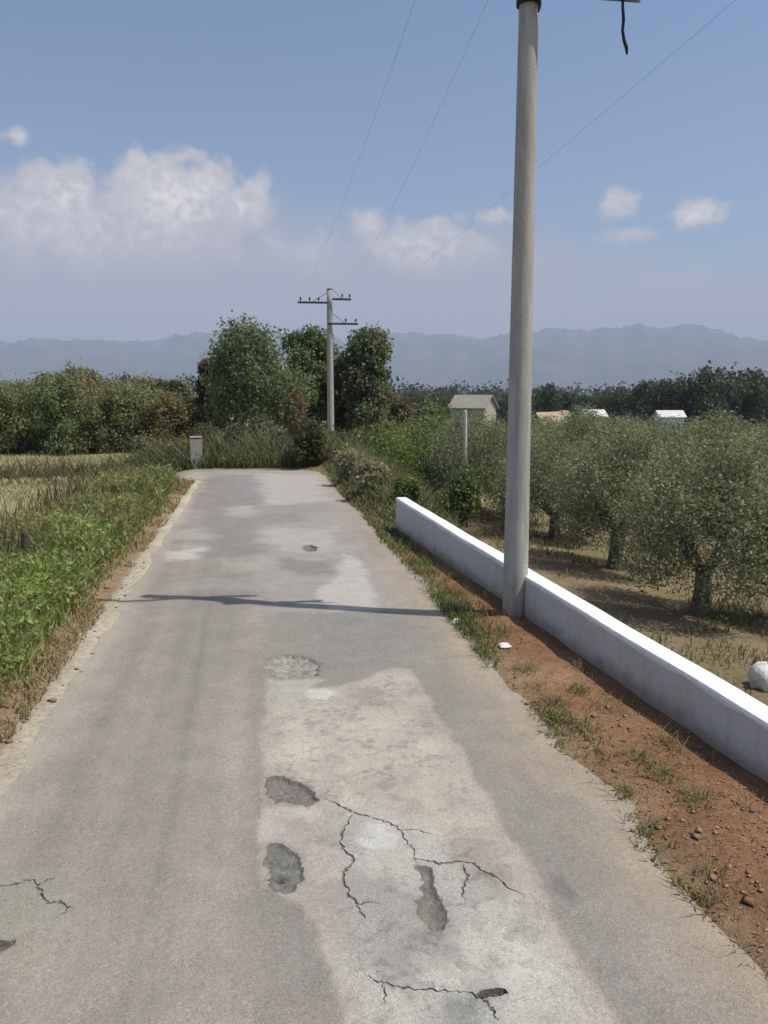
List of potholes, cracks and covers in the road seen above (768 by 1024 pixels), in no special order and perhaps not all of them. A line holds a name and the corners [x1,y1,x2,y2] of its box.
crack [329,800,524,918]
crack [365,974,499,1020]
pothole [264,775,320,807]
pothole [0,940,16,953]
pothole [262,843,305,894]
pothole [414,865,449,933]
crack [0,878,75,919]
